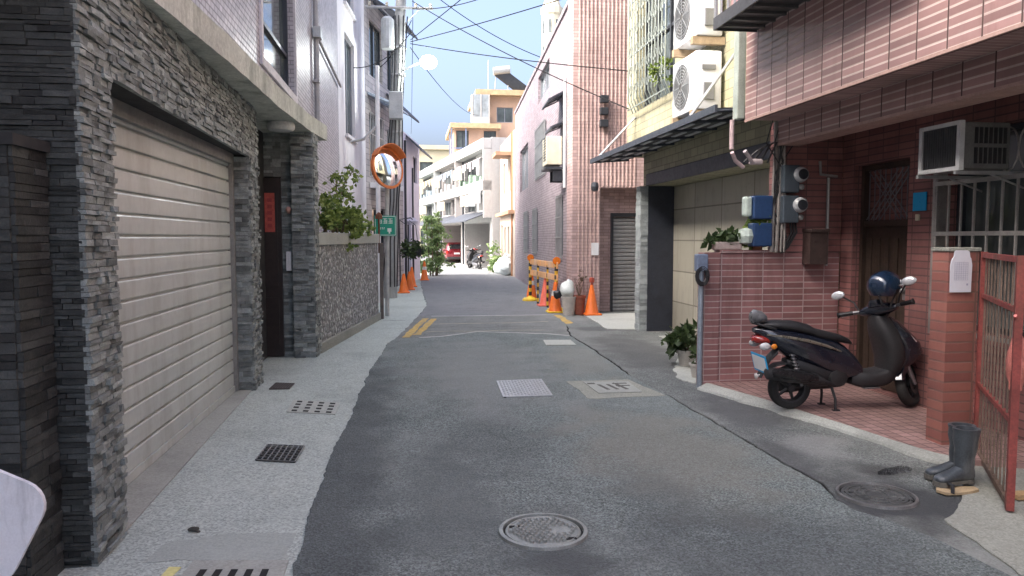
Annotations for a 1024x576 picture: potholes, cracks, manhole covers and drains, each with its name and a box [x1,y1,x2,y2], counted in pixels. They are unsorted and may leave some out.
manhole cover [835,481,919,510]
drain grate [255,444,305,463]
manhole cover [498,513,588,551]
pothole [878,466,911,475]
manhole cover [584,381,642,393]
manhole cover [496,379,553,398]
drain grate [269,382,295,390]
crack [567,327,630,375]
